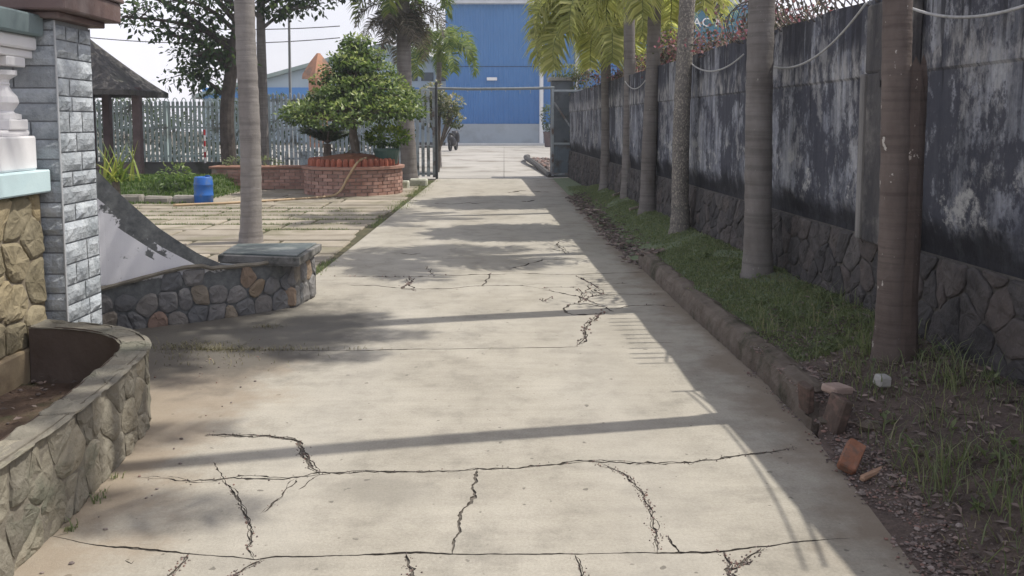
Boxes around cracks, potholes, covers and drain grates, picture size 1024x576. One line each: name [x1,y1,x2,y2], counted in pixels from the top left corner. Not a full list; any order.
crack [330,242,675,346]
crack [148,431,794,576]
